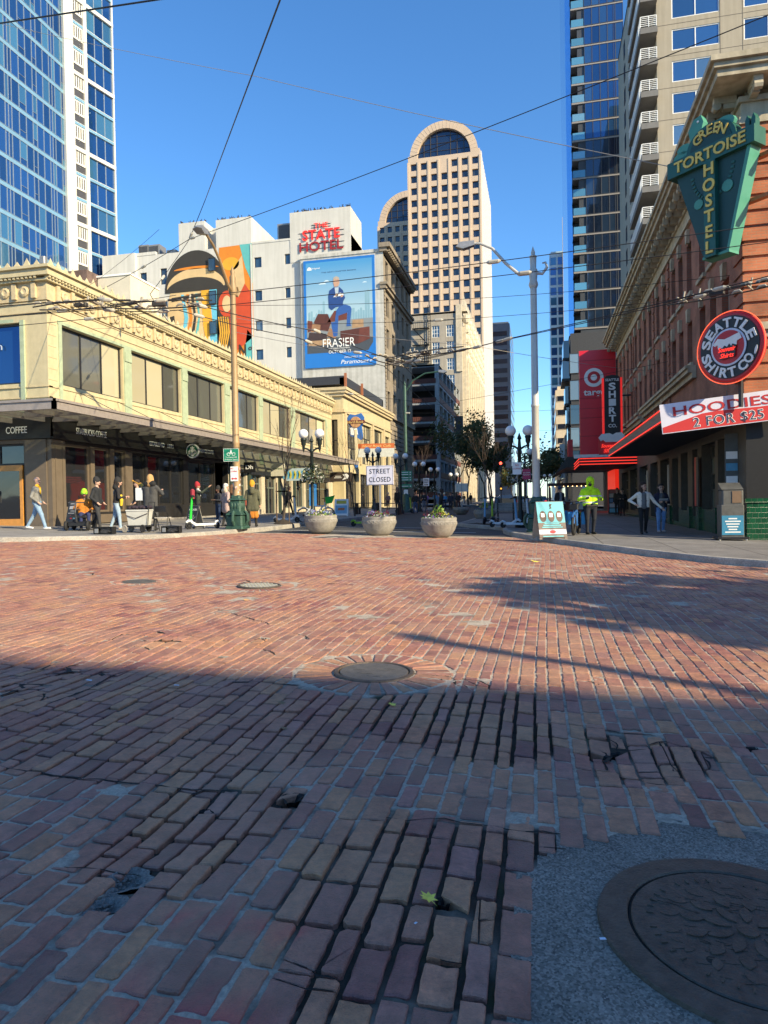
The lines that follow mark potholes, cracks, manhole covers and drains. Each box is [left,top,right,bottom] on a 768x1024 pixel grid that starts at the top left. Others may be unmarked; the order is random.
crack [275,962,337,991]
manhole cover [334,661,414,683]
manhole cover [597,858,768,1024]
pothole [281,793,304,808]
pothole [104,867,155,897]
crack [586,730,712,785]
pothole [80,893,129,916]
